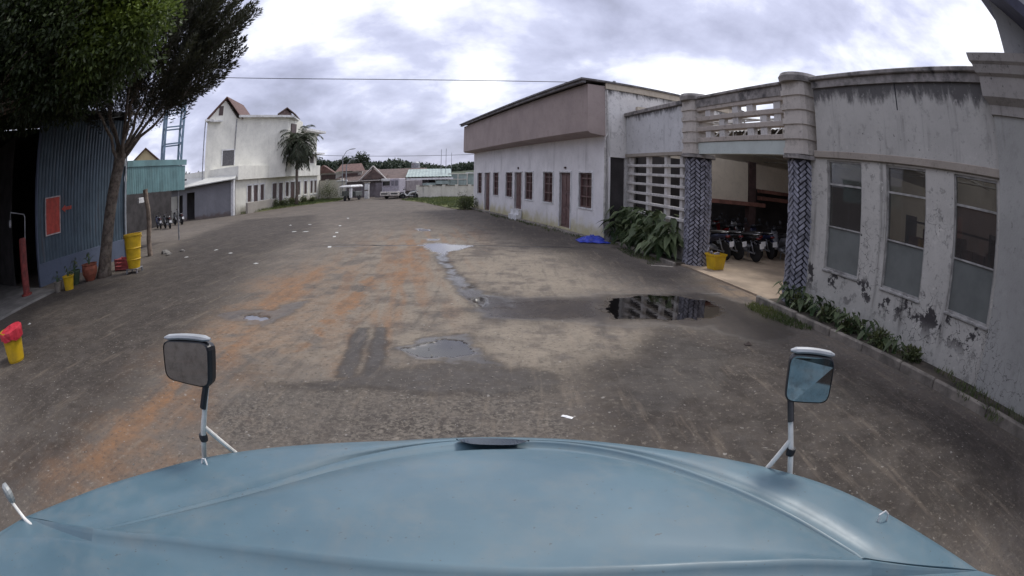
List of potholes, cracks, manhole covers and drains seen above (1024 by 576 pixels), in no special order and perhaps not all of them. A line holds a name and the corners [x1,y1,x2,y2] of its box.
pothole [396,337,483,361]
pothole [232,312,277,323]
